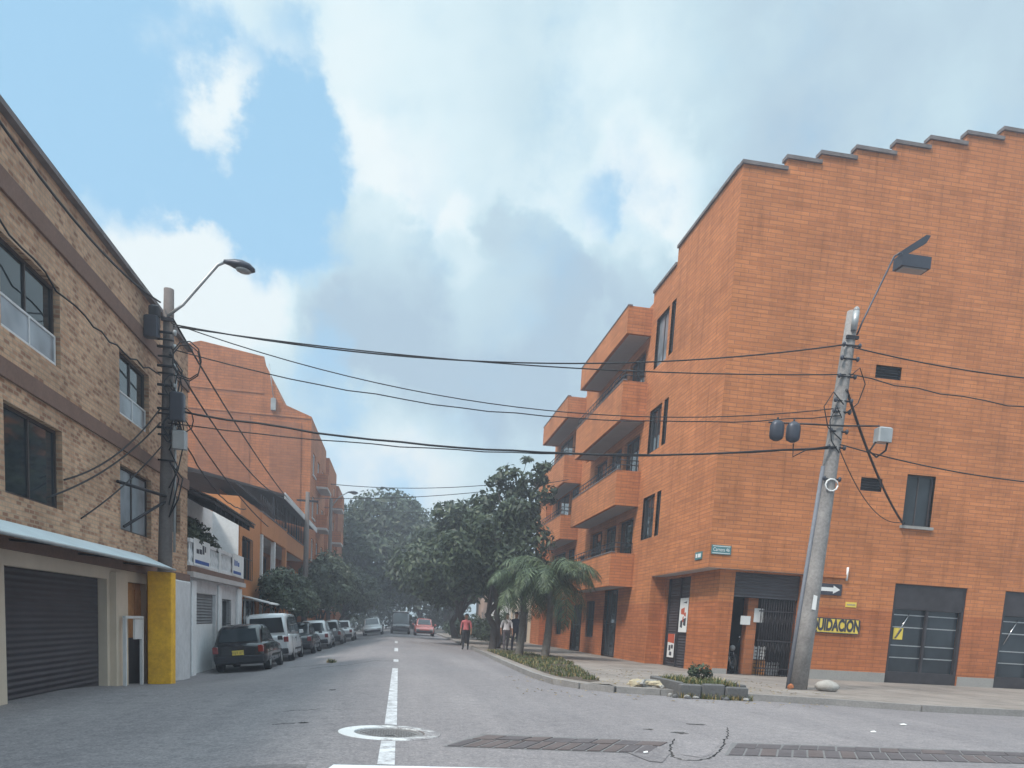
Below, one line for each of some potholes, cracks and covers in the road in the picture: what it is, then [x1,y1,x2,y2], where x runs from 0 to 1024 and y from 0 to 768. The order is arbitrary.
manhole cover [338,725,441,741]
